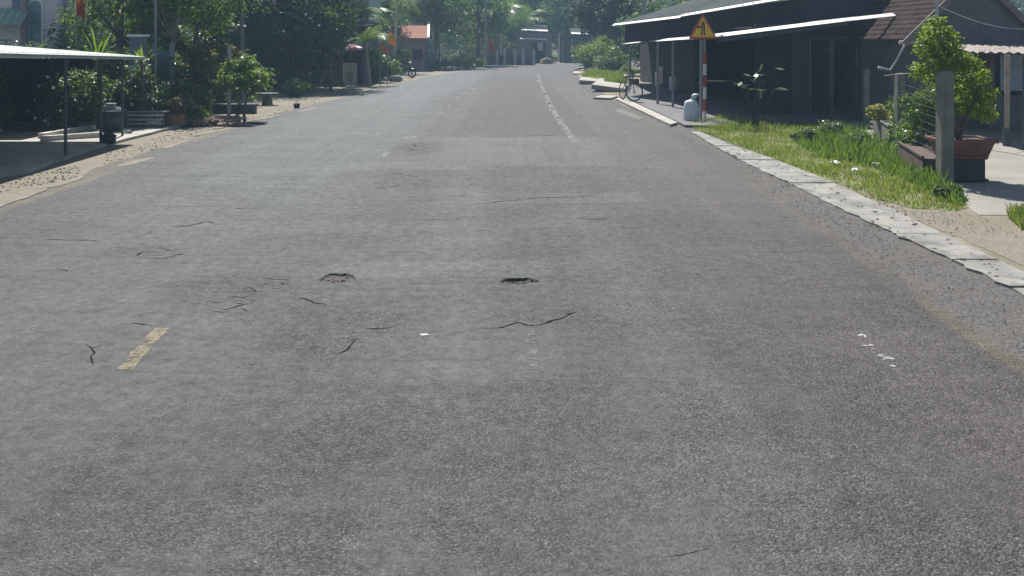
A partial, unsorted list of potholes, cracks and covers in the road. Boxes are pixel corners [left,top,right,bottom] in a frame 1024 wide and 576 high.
crack [87,345,99,365]
crack [213,278,323,313]
crack [480,311,578,329]
crack [468,195,590,205]
crack [333,325,397,354]
crack [134,231,182,259]
pothole [318,273,356,283]
